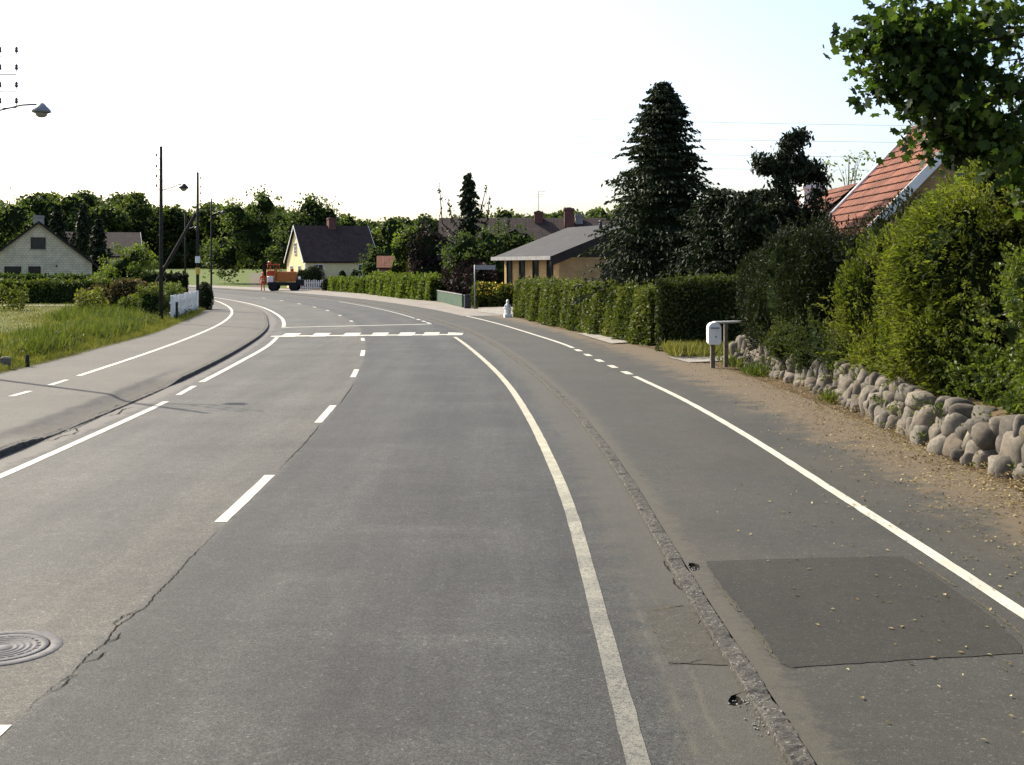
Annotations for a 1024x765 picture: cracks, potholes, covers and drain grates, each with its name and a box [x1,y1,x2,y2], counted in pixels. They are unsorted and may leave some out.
crack [18,530,218,717]
pothole [728,696,747,707]
manhole cover [0,630,63,666]
crack [48,386,170,441]
